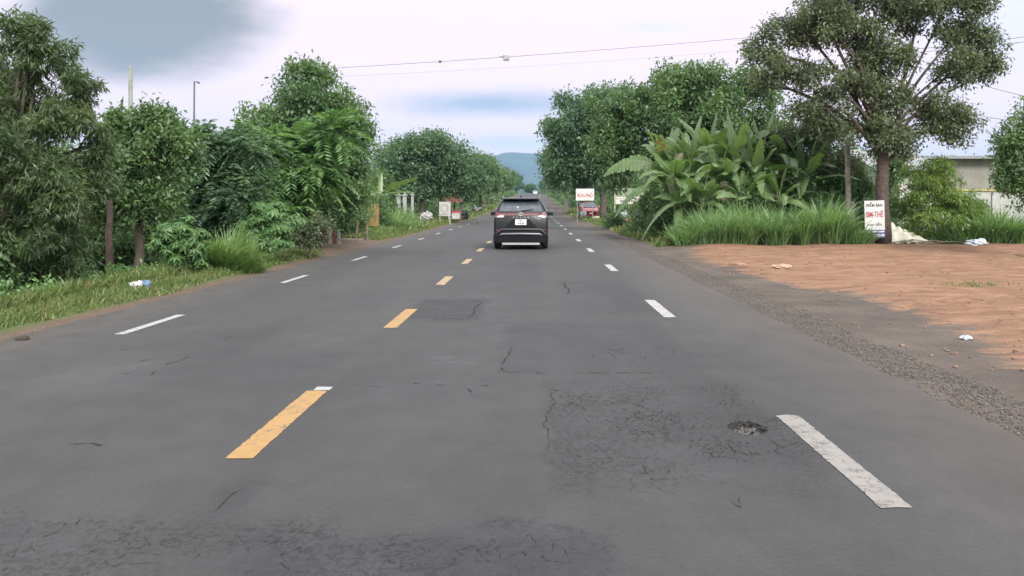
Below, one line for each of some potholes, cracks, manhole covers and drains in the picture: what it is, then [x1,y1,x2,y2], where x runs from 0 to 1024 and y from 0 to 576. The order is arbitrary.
pothole [726,421,768,435]
crack [4,519,81,569]
crack [350,533,585,576]
crack [375,347,798,493]
crack [74,519,344,576]
